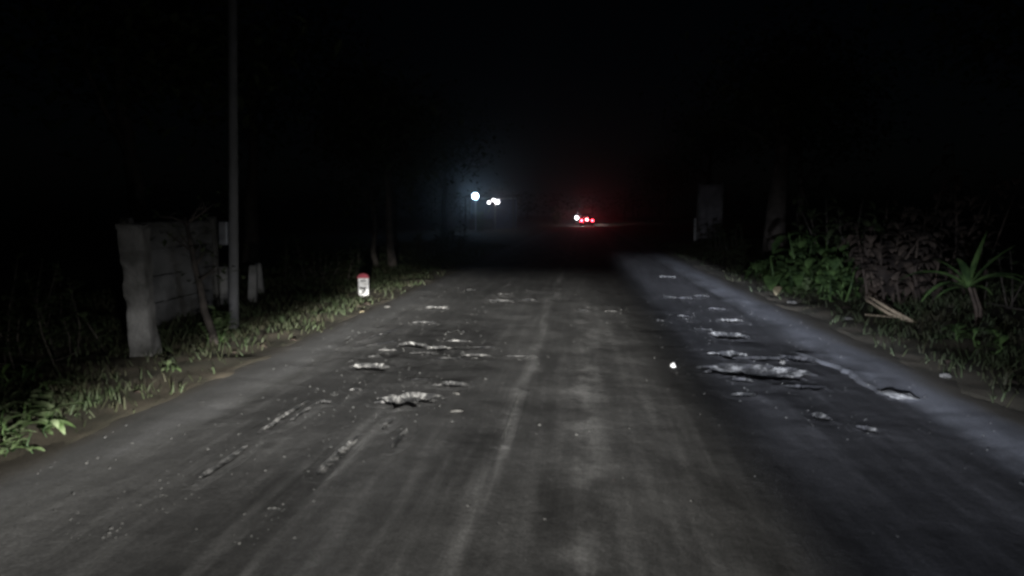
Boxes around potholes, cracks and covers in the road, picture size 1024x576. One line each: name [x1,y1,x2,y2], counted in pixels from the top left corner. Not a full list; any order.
pothole [365,390,451,411]
pothole [688,362,826,383]
pothole [702,331,756,341]
pothole [341,362,397,373]
pothole [424,380,477,390]
pothole [390,341,433,349]
pothole [699,350,753,362]
